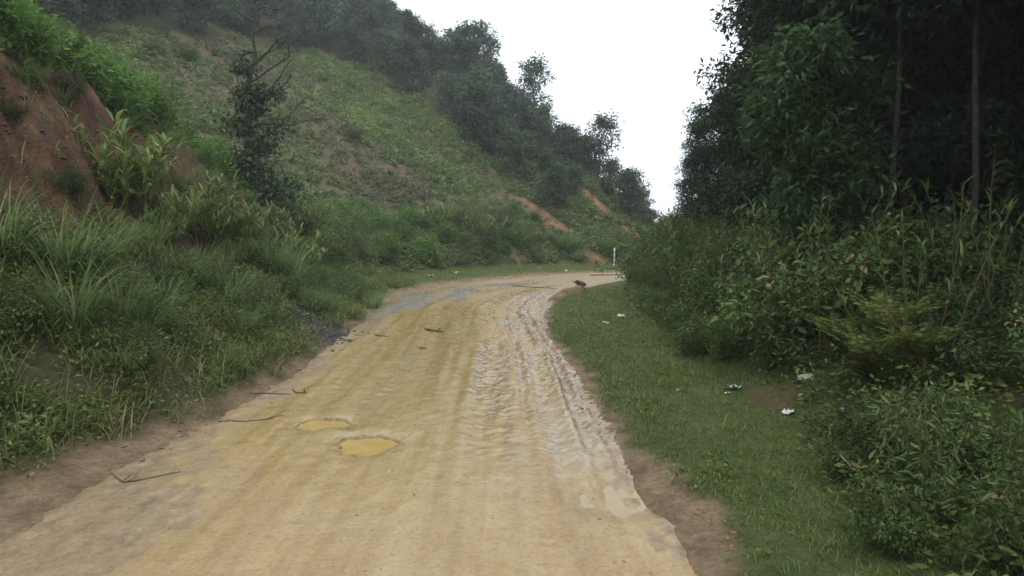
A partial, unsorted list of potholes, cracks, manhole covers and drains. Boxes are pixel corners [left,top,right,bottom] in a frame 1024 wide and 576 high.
pothole [335,434,403,457]
pothole [293,417,354,432]
